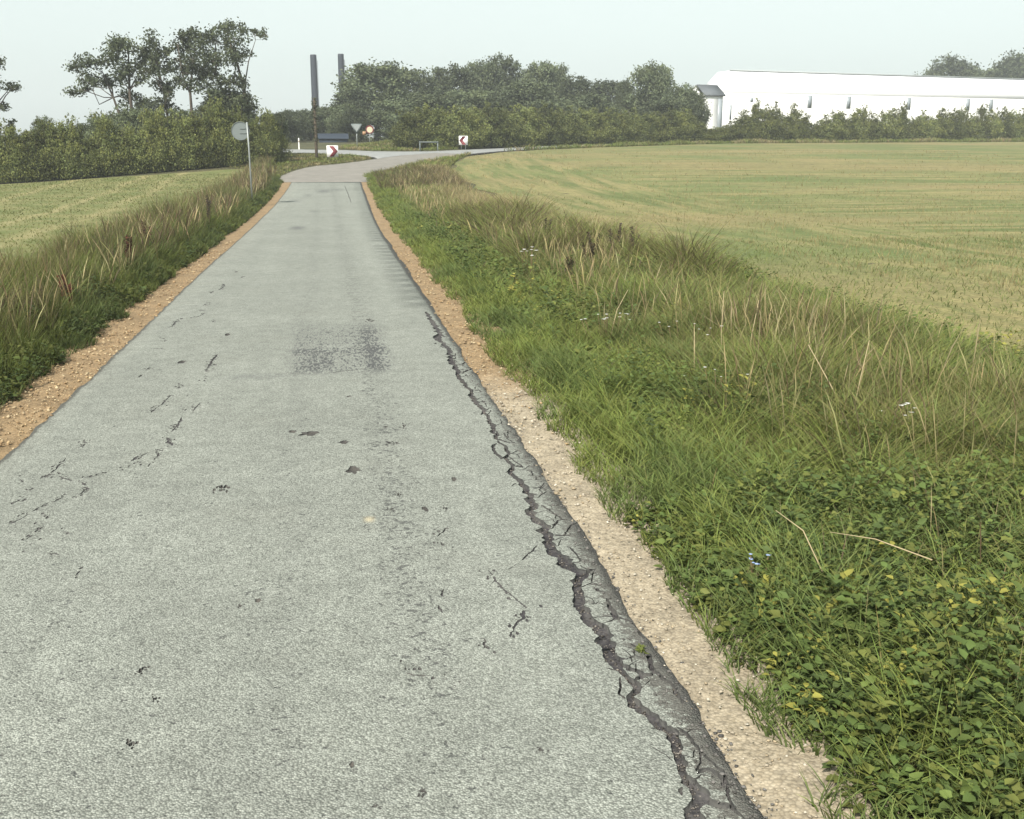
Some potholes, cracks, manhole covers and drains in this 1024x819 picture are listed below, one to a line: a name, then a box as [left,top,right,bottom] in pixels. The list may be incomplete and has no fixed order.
crack [9,270,245,578]
crack [425,312,744,819]
